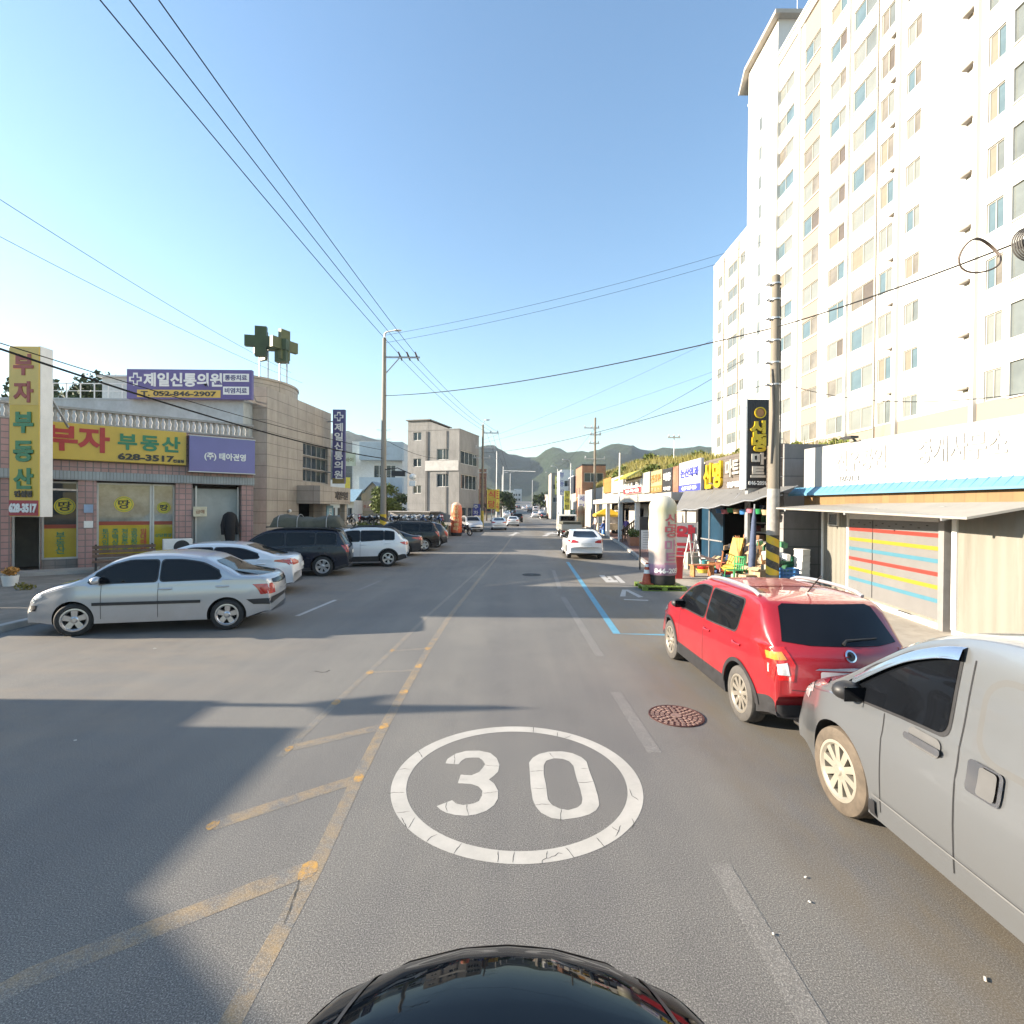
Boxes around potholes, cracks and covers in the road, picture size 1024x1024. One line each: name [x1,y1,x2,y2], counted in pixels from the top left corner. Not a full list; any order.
manhole cover [648,705,705,727]
